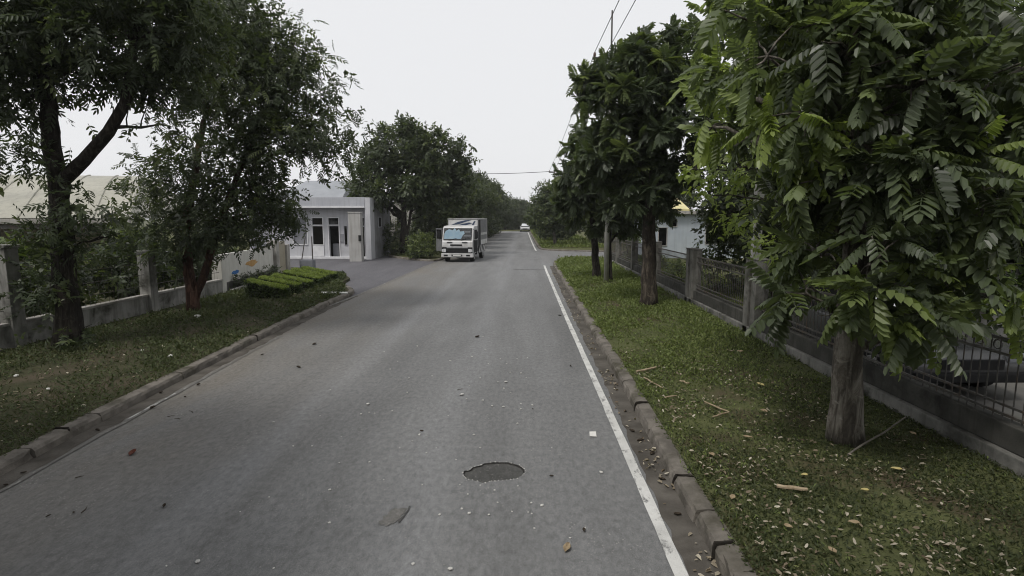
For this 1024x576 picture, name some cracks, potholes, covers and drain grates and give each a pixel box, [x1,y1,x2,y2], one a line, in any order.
pothole [462,461,526,483]
